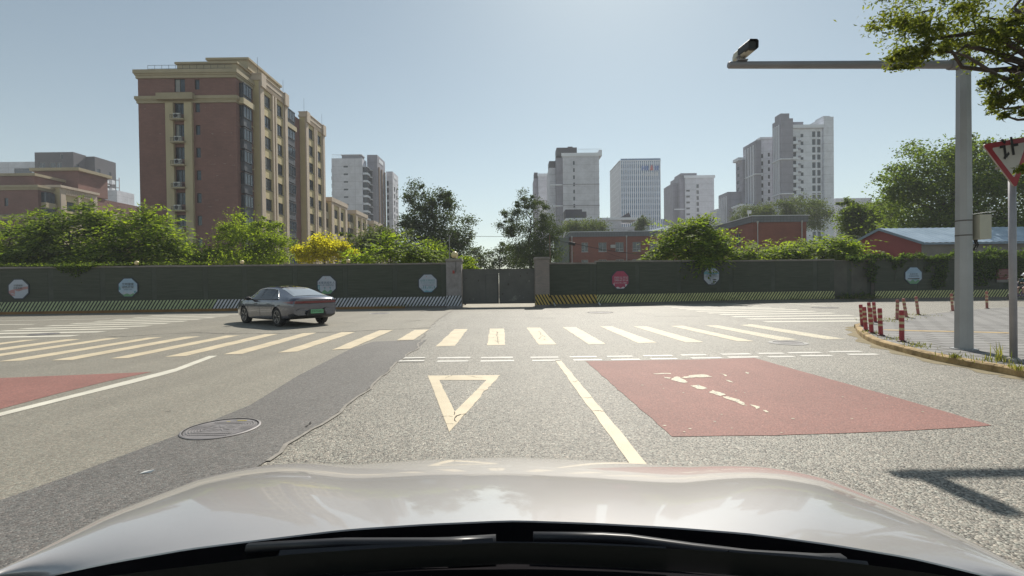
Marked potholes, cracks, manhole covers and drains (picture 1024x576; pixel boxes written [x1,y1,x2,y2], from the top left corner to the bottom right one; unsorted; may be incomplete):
manhole cover [178,418,261,440]
